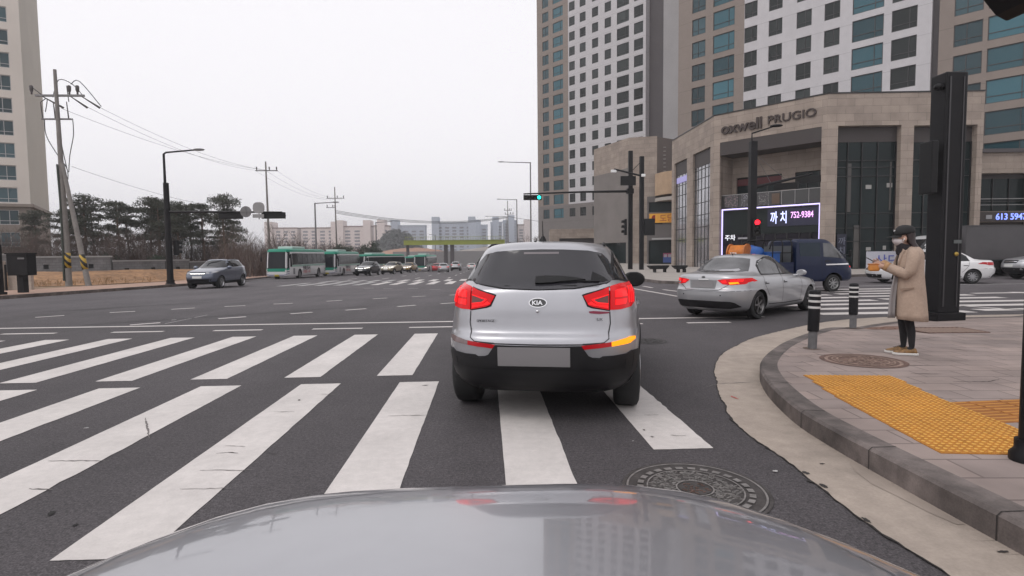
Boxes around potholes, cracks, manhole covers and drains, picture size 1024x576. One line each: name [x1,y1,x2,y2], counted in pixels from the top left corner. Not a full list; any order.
manhole cover [819,354,910,368]
manhole cover [622,463,774,514]
